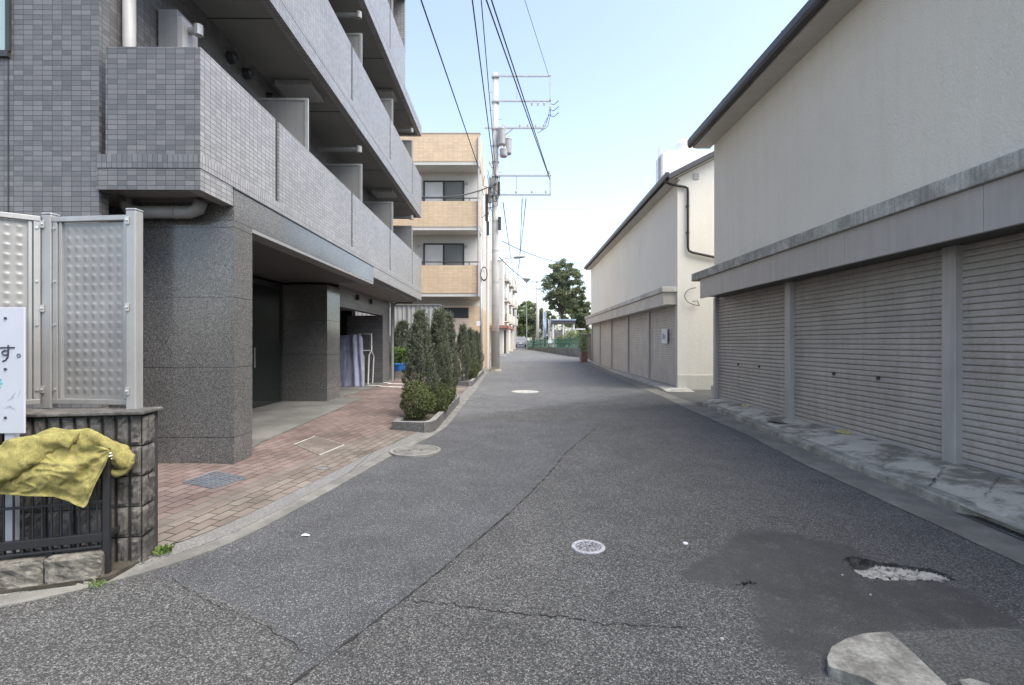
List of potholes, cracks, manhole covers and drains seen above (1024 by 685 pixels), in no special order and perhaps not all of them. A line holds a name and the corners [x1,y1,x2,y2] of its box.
pothole [841,556,955,582]
manhole cover [294,436,344,455]
manhole cover [389,445,441,458]
manhole cover [571,540,605,554]
manhole cover [182,471,247,489]
